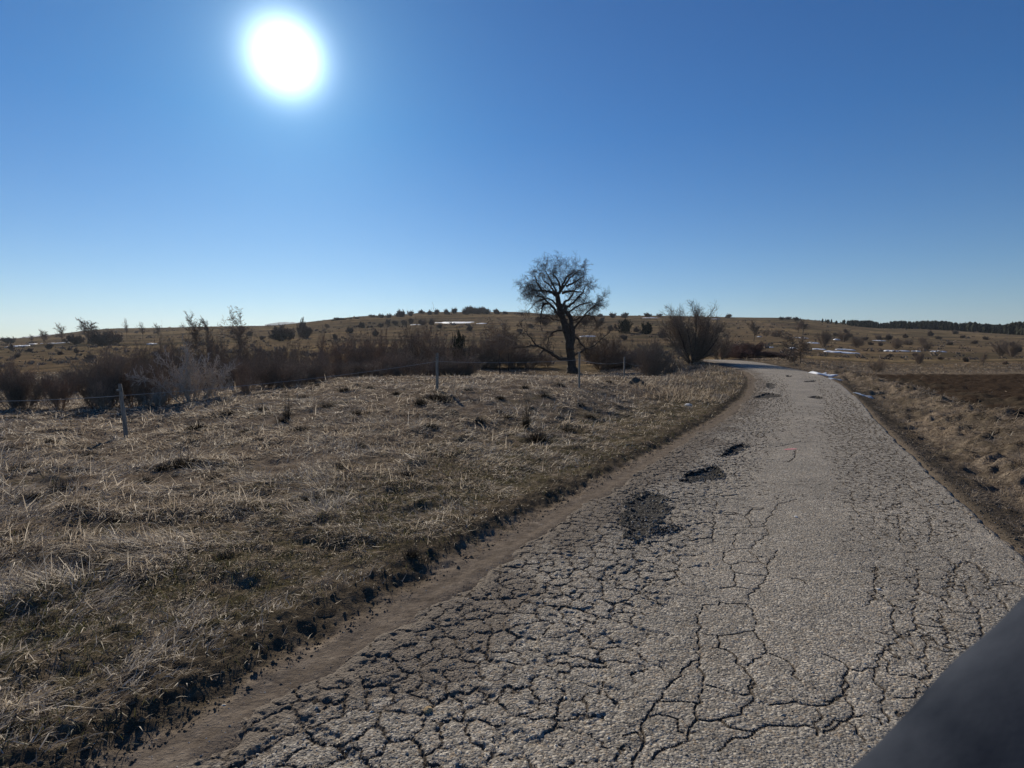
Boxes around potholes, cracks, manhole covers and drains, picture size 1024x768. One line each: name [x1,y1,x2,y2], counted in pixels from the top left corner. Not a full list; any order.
pothole [619,491,672,541]
pothole [720,444,749,456]
crack [622,374,1024,768]
pothole [678,465,726,483]
